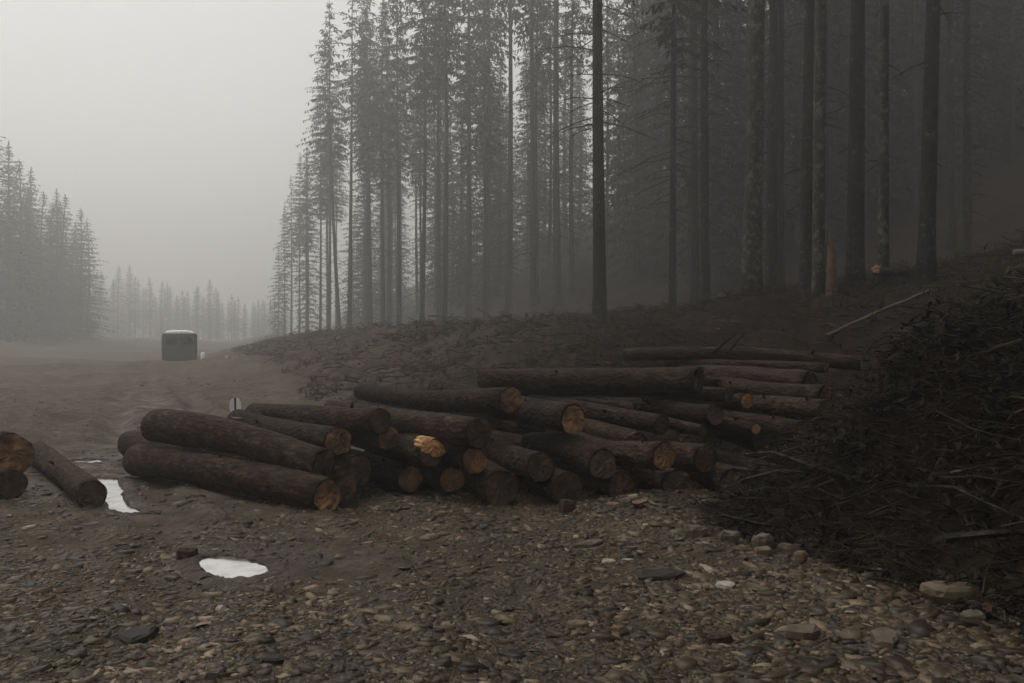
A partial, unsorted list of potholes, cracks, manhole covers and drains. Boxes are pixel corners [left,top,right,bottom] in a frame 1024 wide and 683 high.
pothole [174,550,289,587]
pothole [92,475,161,516]
